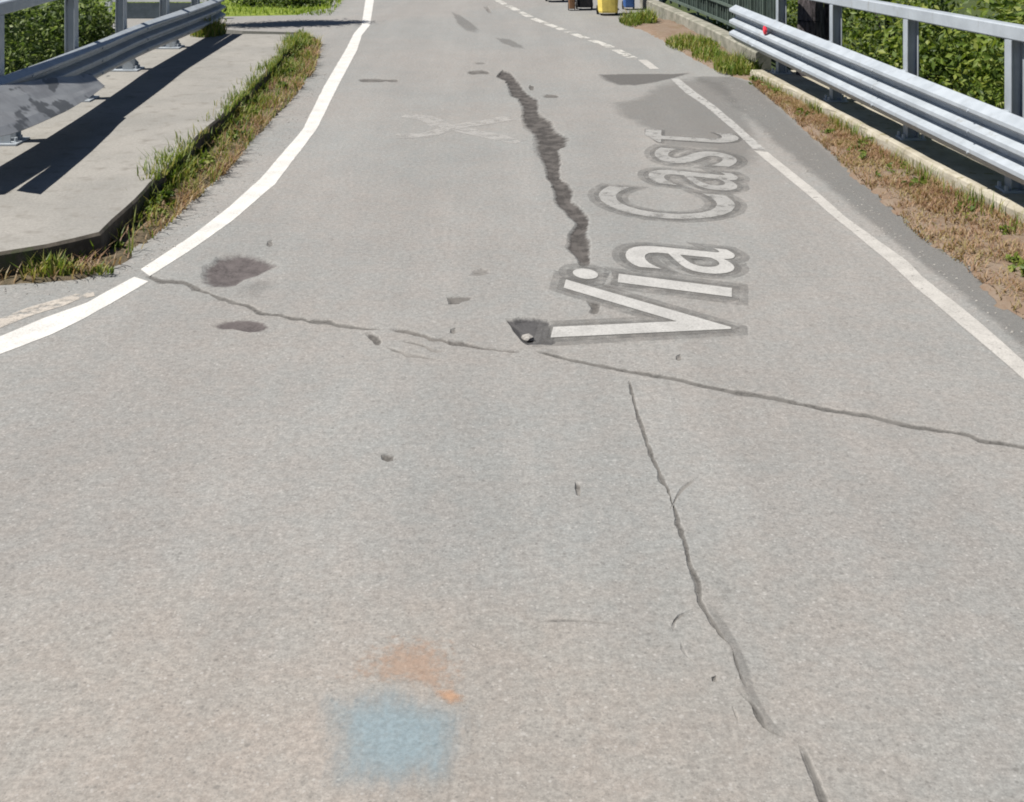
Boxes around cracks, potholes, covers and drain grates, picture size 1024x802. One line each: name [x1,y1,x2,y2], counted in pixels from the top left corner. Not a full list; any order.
pothole [506,317,557,345]
crack [144,275,1024,802]
